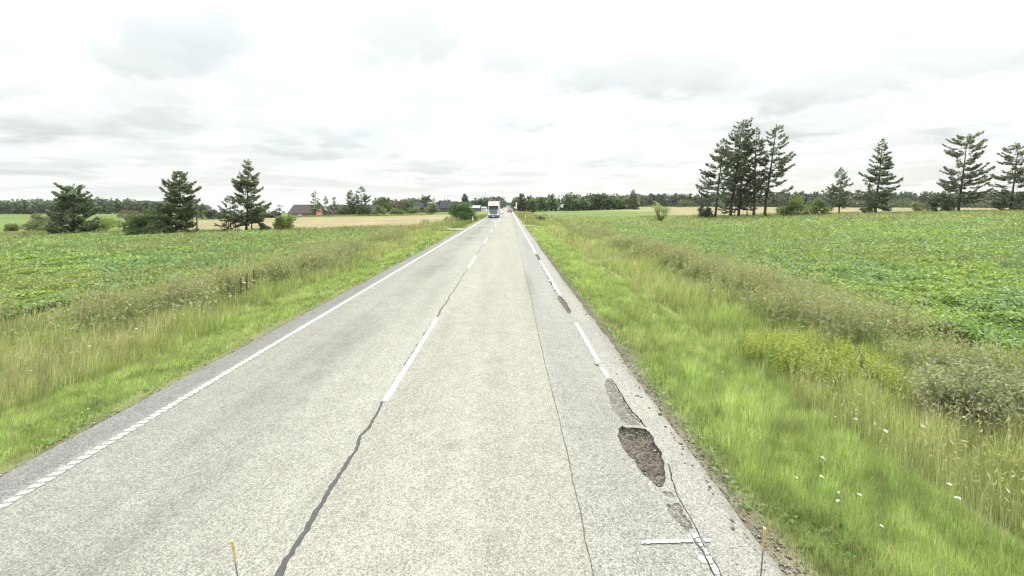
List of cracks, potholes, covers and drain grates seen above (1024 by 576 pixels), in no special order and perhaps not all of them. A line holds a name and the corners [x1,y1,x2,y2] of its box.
pothole [604,380,641,426]
pothole [666,503,693,531]
crack [667,463,722,576]
pothole [617,426,666,487]
